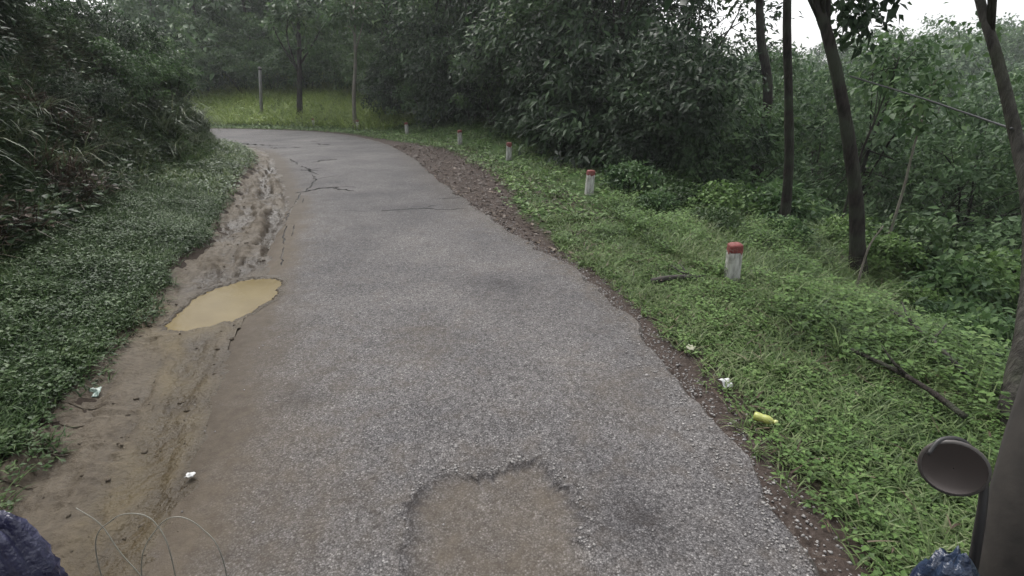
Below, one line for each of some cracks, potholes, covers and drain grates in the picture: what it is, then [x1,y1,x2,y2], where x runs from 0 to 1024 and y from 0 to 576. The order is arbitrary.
pothole [158,275,288,332]
pothole [395,455,604,576]
crack [280,144,353,266]
